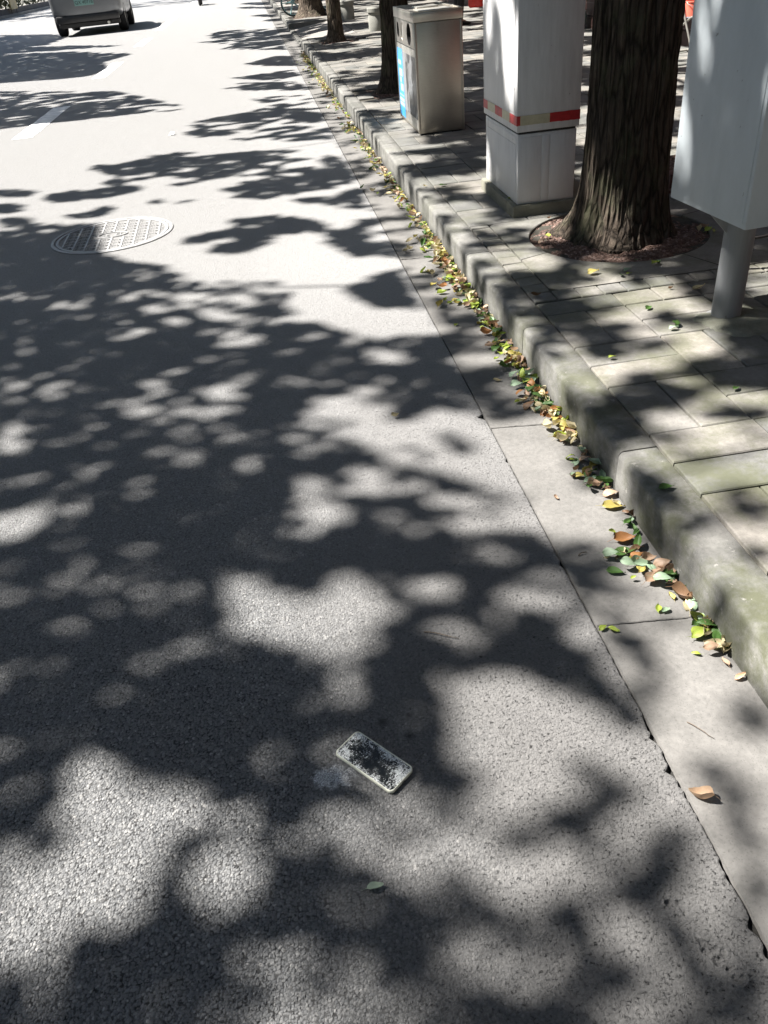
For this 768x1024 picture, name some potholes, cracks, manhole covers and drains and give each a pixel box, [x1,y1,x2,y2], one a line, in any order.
manhole cover [51,217,174,255]
